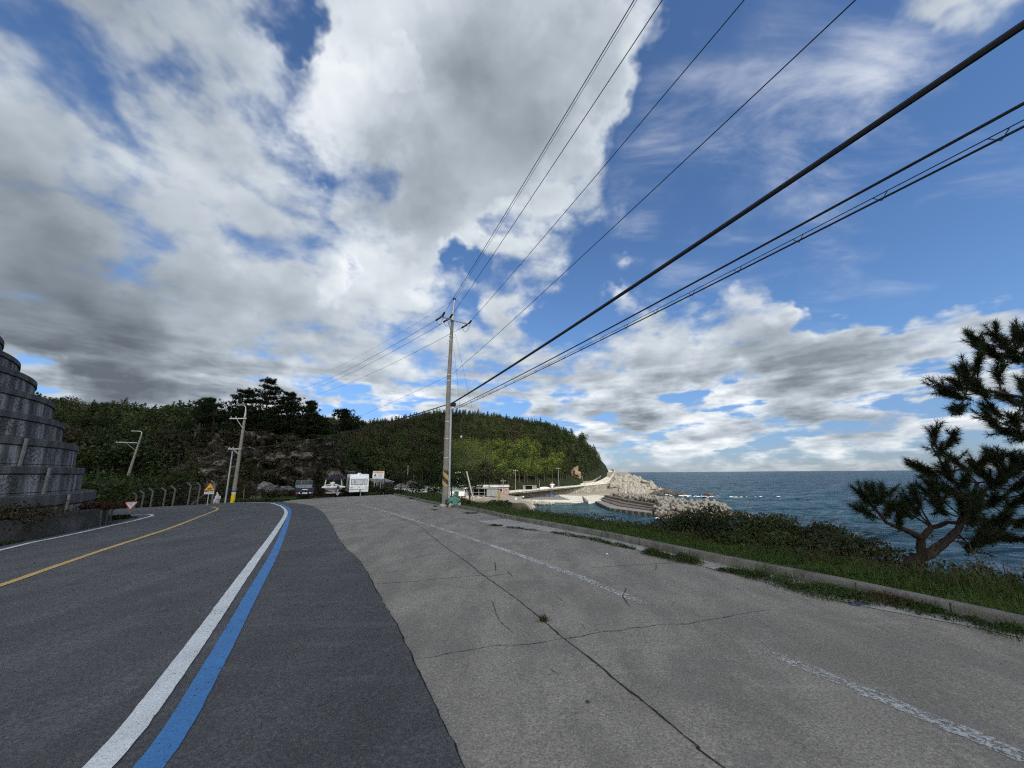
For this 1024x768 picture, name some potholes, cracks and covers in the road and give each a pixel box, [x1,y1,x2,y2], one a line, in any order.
crack [416,601,762,659]
